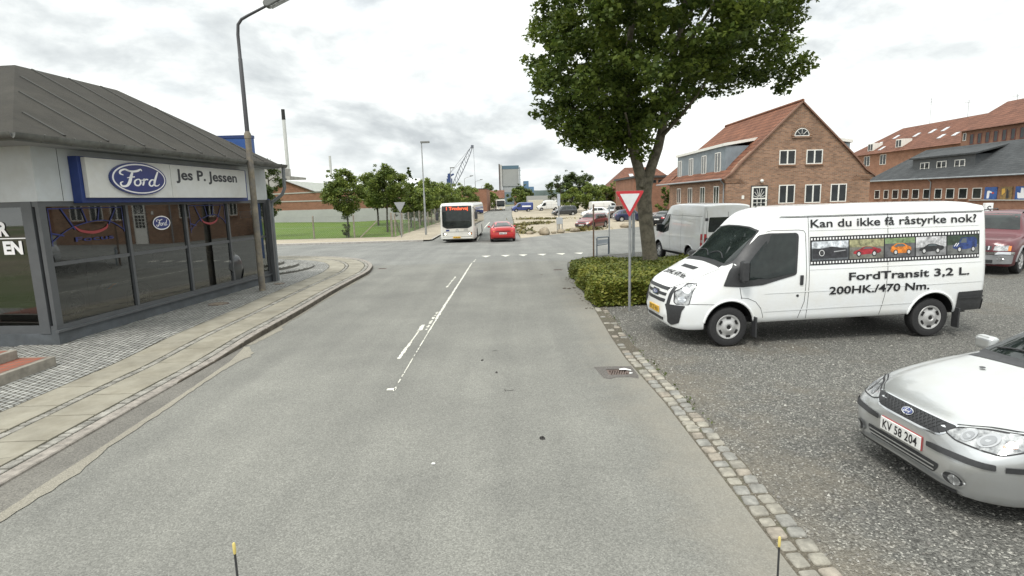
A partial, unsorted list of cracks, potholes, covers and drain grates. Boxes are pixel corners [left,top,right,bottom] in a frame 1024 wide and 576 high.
drain grate [594,366,638,379]
